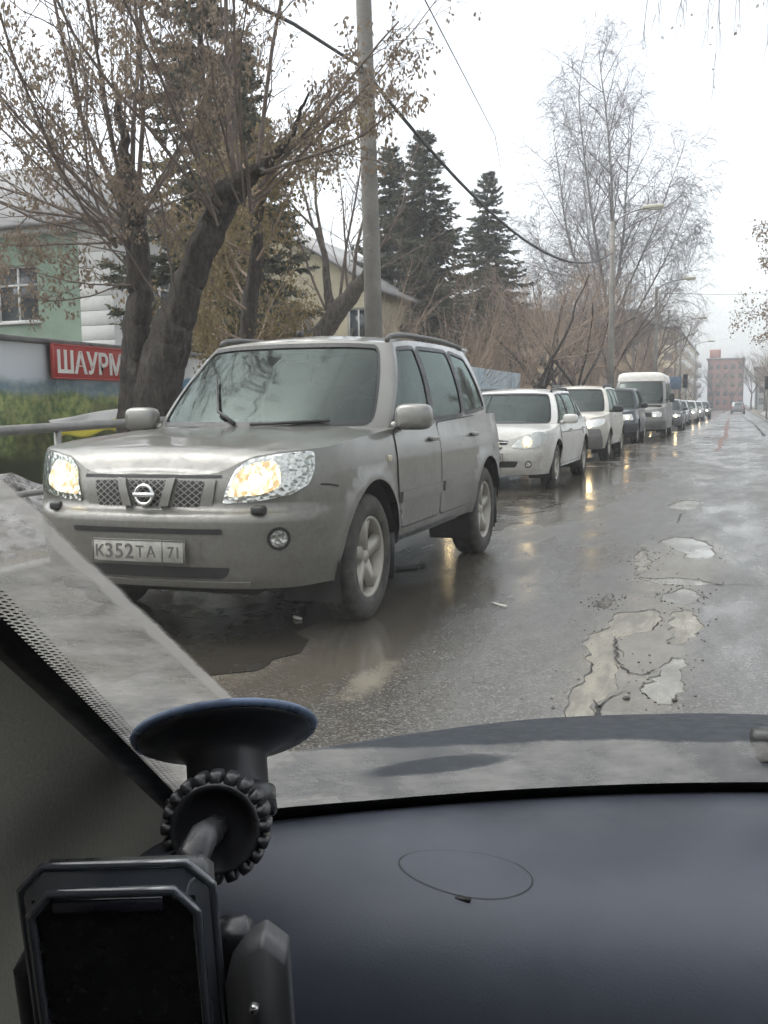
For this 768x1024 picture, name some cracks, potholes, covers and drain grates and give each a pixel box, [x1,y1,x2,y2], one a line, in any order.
pothole [639,657,689,705]
pothole [666,609,705,645]
pothole [633,549,652,573]
pothole [659,537,716,559]
pothole [659,588,702,605]
pothole [668,500,701,510]
pothole [595,596,615,608]
pothole [563,609,663,717]
